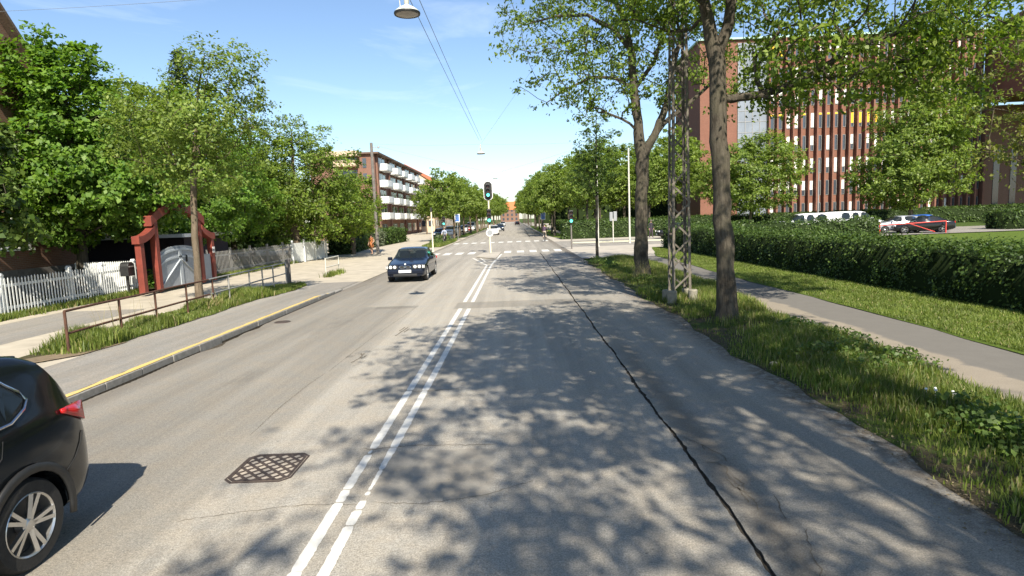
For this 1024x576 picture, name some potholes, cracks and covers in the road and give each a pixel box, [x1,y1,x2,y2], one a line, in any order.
crack [805,528,823,576]
crack [185,481,531,520]
crack [687,438,787,520]
